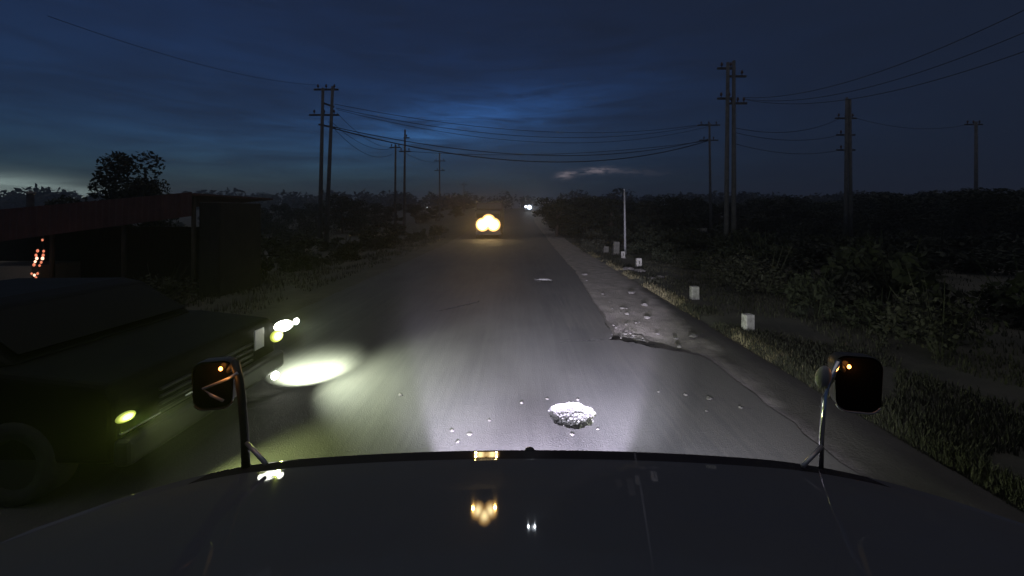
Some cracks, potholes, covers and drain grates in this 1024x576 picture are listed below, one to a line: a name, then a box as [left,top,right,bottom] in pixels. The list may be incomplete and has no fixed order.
pothole [612,330,659,348]
pothole [547,402,596,429]
